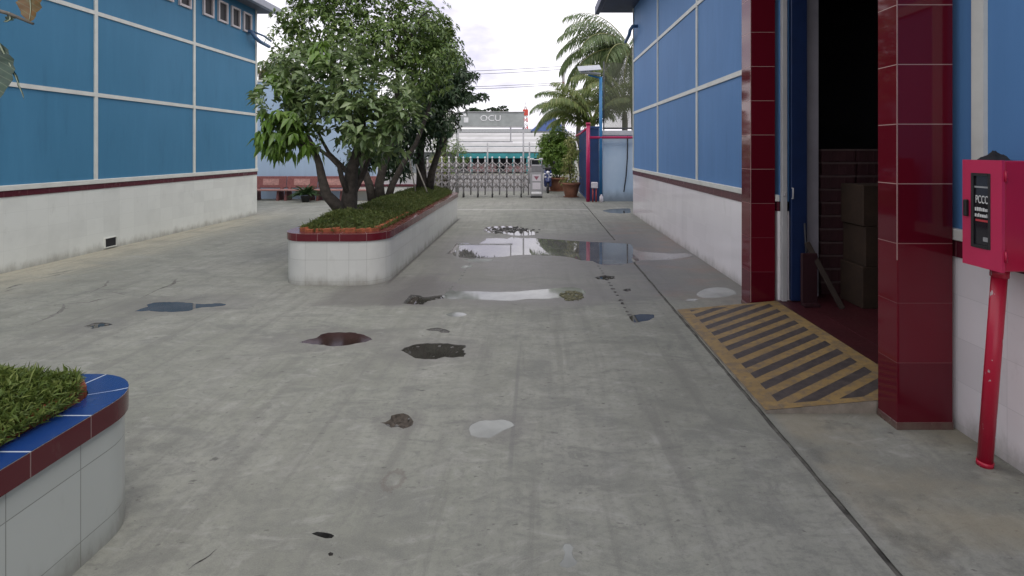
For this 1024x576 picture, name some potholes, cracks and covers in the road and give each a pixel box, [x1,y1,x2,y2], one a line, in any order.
crack [144,278,190,297]
crack [28,279,125,326]
pothole [401,343,466,359]
pothole [382,413,414,429]
pothole [404,294,446,305]
crack [4,268,83,308]
